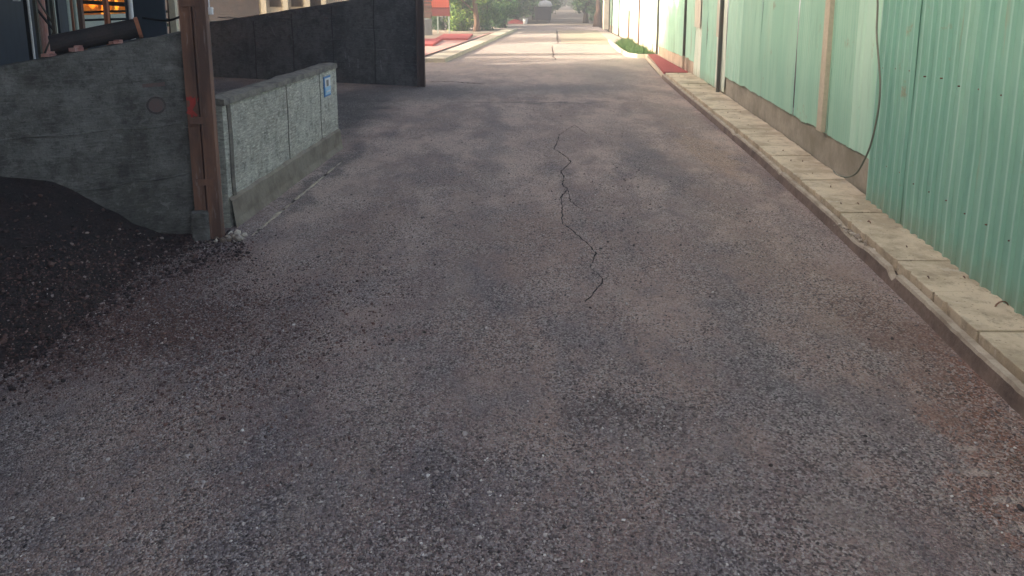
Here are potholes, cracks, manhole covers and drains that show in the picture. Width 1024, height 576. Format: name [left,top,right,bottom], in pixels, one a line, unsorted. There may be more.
crack [554,125,603,302]
